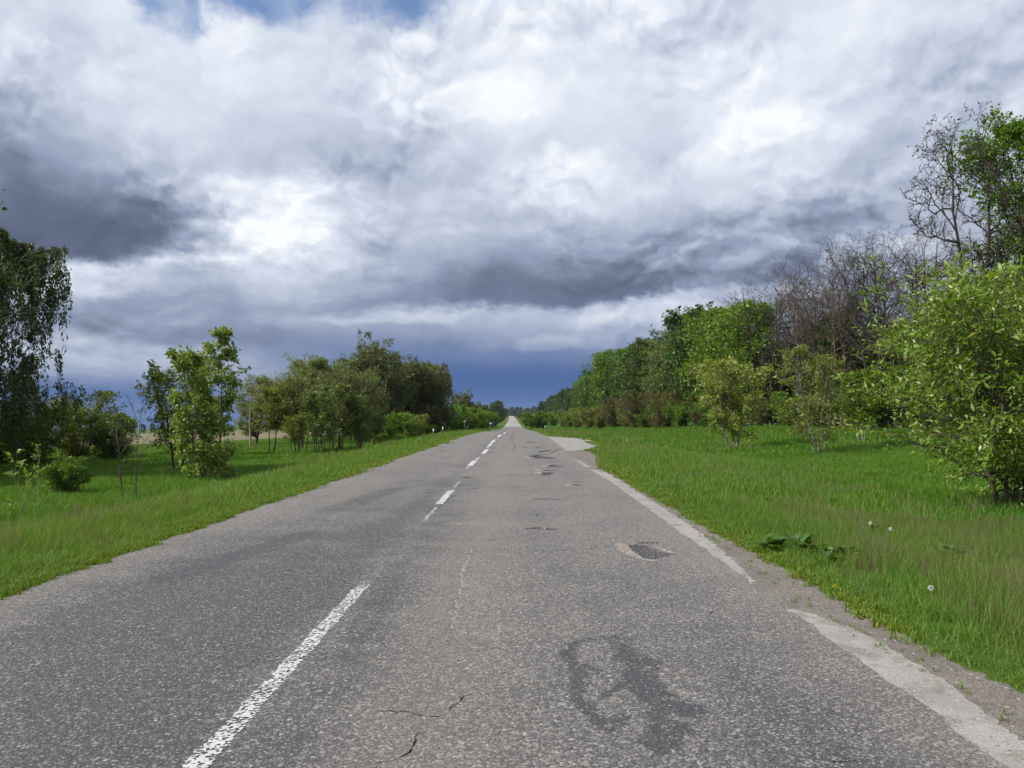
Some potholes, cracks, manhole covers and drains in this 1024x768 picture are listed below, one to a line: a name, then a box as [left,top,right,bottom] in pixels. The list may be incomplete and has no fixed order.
pothole [614,543,676,562]
crack [363,692,476,768]
crack [442,548,472,629]
